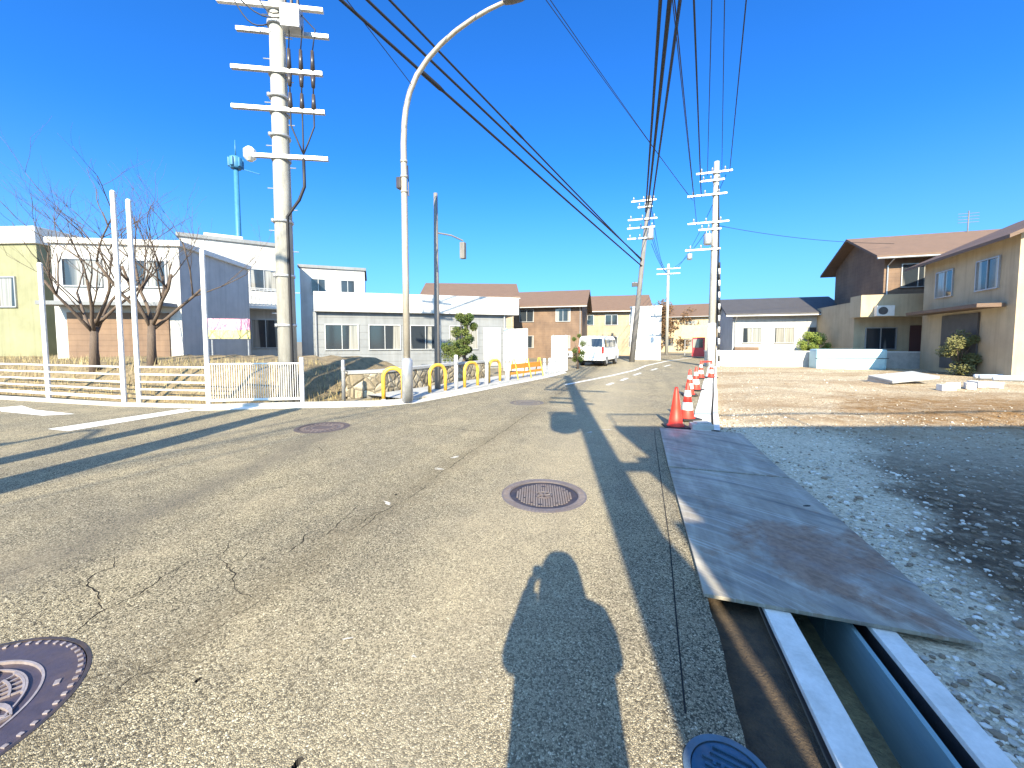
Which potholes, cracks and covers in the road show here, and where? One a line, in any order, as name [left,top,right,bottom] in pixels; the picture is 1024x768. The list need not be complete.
utility cover [683,734,767,768]
manhole cover [0,636,92,757]
crack [65,558,194,637]
crack [86,543,265,702]
manhole cover [293,422,350,433]
manhole cover [502,479,587,513]
